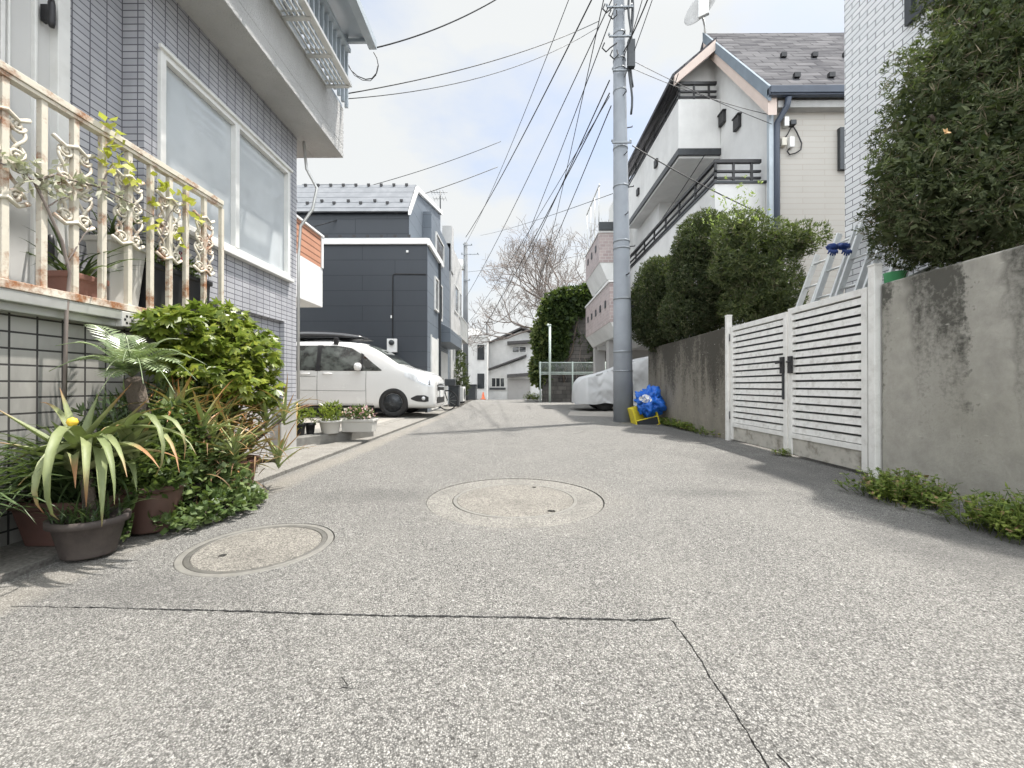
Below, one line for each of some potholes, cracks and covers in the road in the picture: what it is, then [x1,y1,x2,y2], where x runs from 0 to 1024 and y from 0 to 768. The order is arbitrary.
manhole cover [174,524,334,577]
manhole cover [426,479,604,528]
